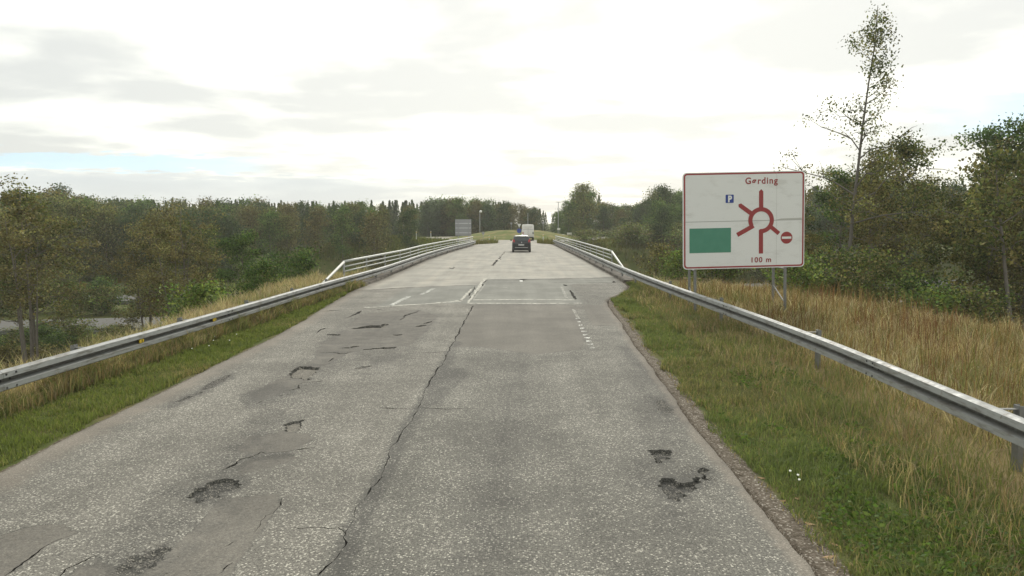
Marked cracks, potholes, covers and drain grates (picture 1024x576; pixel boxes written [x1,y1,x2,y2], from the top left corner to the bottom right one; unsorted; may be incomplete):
crack [5,534,100,576]
pothole [289,366,319,380]
crack [222,447,314,470]
pothole [283,419,305,432]
pothole [642,470,727,525]
crack [254,342,462,576]
pothole [149,470,262,524]
